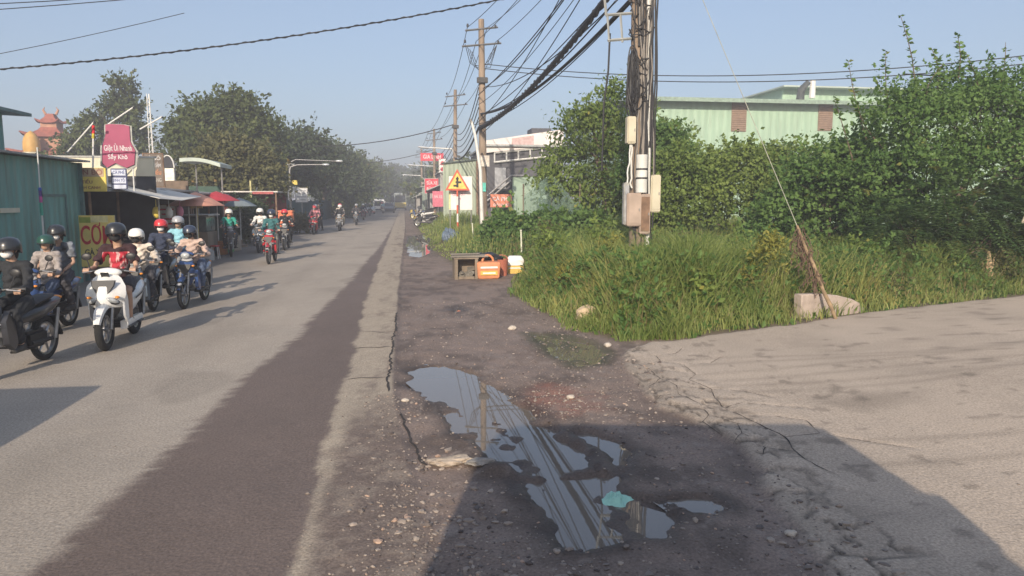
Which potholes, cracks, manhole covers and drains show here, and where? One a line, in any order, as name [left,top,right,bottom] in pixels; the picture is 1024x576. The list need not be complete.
pothole [399,364,691,557]
crack [400,412,427,465]
crack [633,348,910,475]
